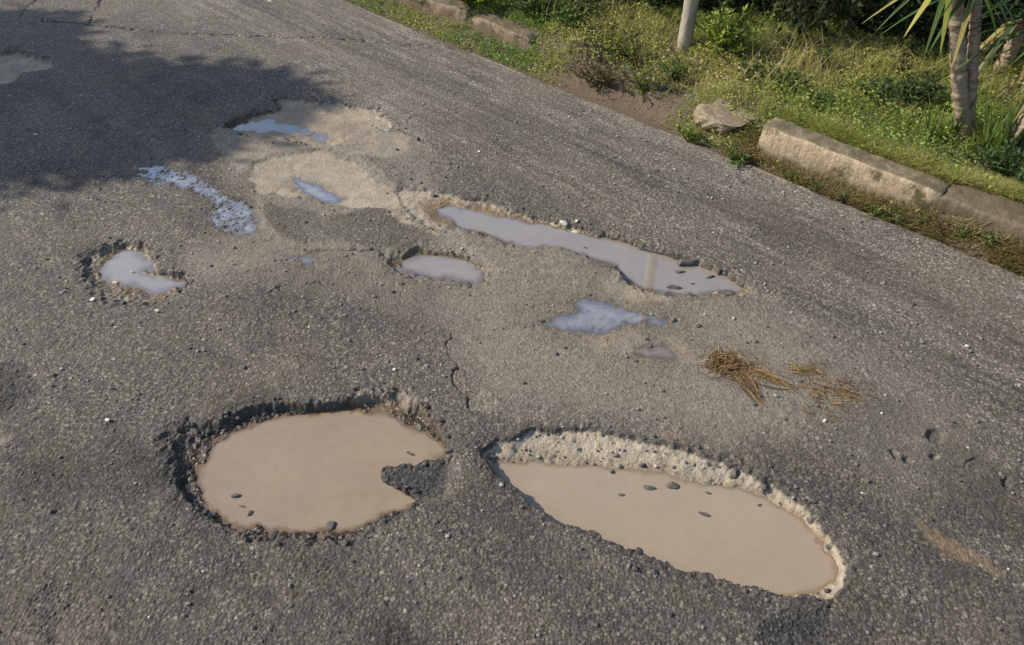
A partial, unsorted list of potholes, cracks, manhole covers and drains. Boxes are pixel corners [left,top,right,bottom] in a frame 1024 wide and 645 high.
pothole [79,238,191,305]
pothole [376,244,492,286]
pothole [131,163,269,237]
pothole [479,423,856,602]
pothole [399,185,754,297]
pothole [162,387,450,543]
pothole [531,292,678,341]
